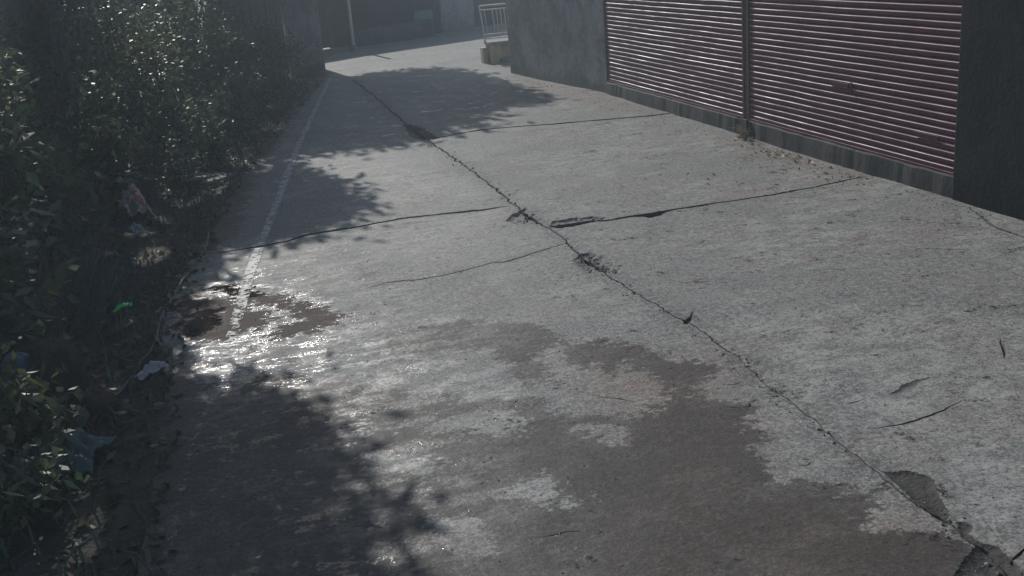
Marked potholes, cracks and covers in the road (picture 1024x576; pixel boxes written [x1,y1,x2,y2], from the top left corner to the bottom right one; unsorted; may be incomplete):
pothole [572,253,627,277]
crack [208,80,1024,576]
pothole [953,522,1023,576]
pothole [878,470,953,524]
